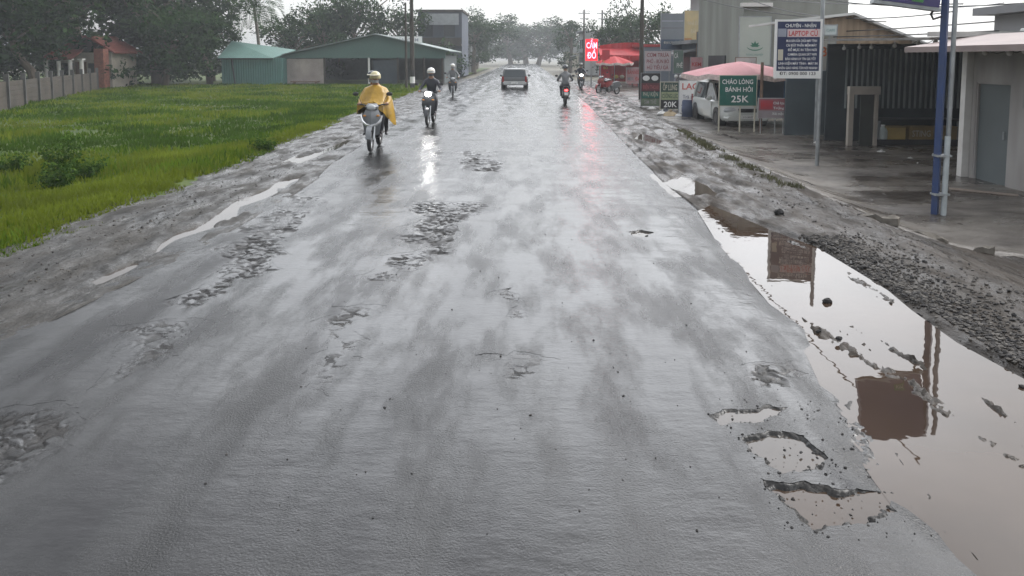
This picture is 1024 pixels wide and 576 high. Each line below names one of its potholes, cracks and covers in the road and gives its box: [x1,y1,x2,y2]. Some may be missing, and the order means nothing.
pothole [741,430,828,475]
pothole [762,479,897,532]
pothole [630,229,654,237]
pothole [708,404,788,426]
